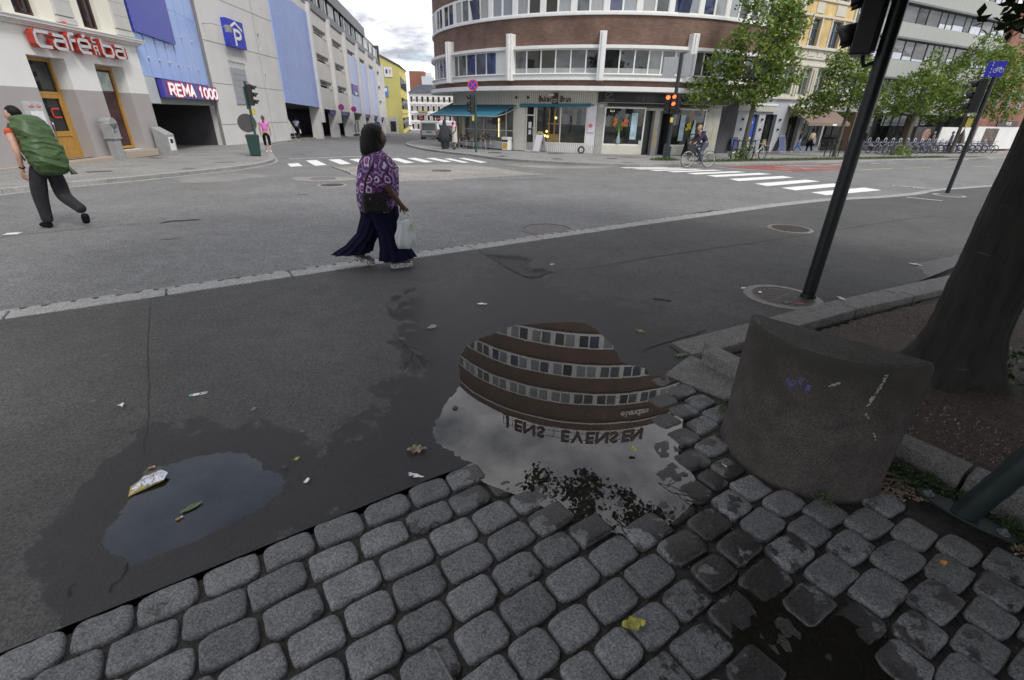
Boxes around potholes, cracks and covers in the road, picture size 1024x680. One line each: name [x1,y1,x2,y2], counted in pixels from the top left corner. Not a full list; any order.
manhole cover [743,285,824,310]
manhole cover [521,223,574,235]
manhole cover [767,224,814,234]
